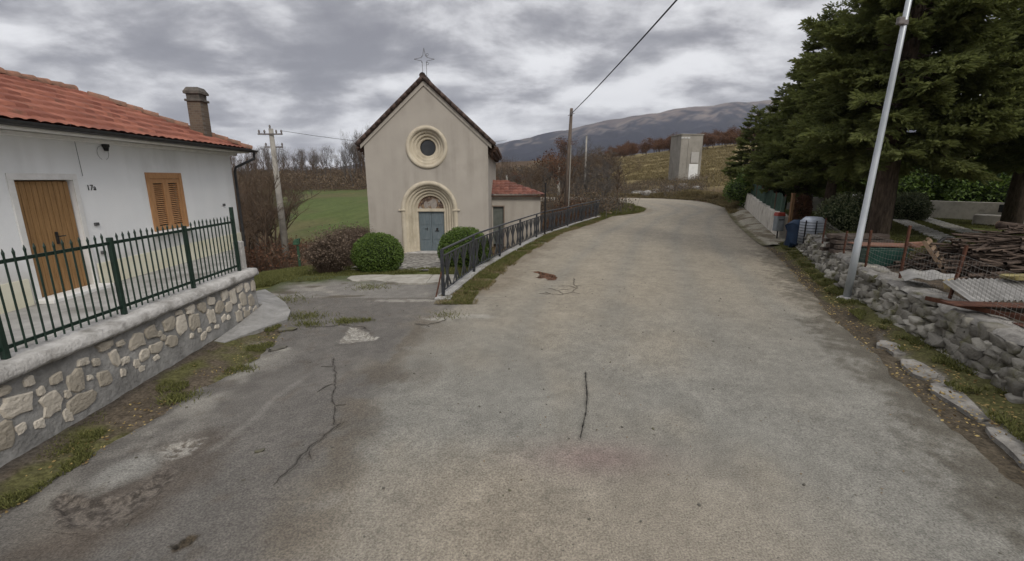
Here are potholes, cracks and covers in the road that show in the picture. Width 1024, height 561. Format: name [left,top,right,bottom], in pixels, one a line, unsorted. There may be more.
crack [578,372,590,440]
crack [539,278,580,295]
crack [273,357,346,485]
